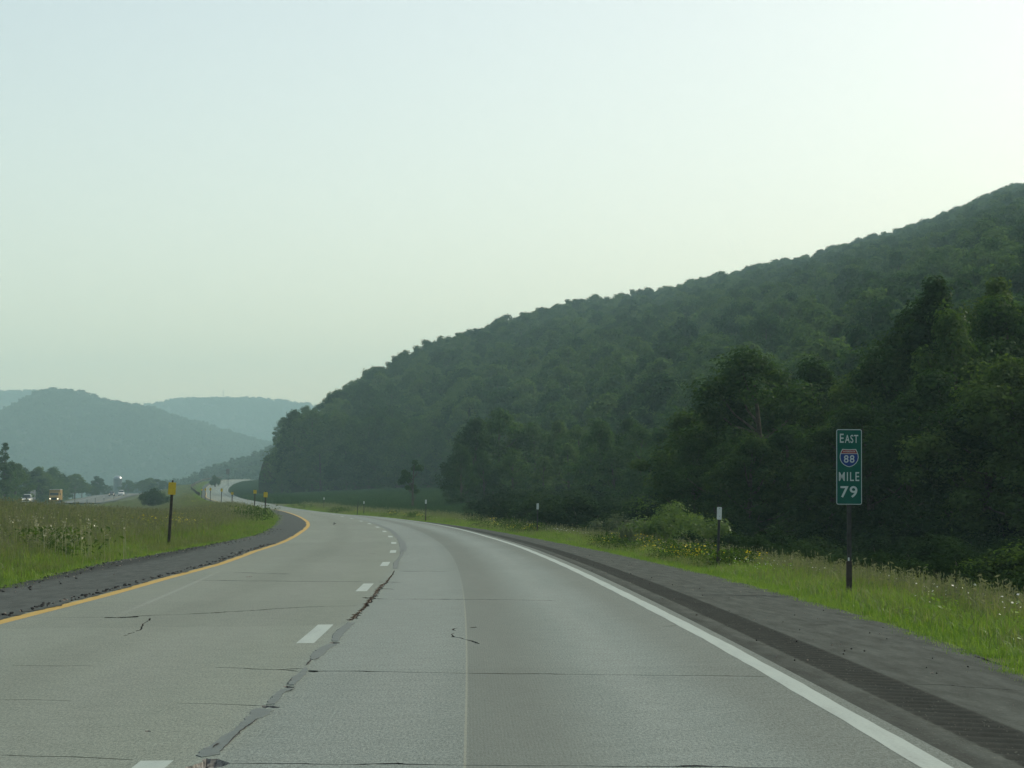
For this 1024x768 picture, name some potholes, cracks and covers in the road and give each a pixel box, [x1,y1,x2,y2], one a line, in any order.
crack [220,572,394,621]
crack [76,606,323,636]
